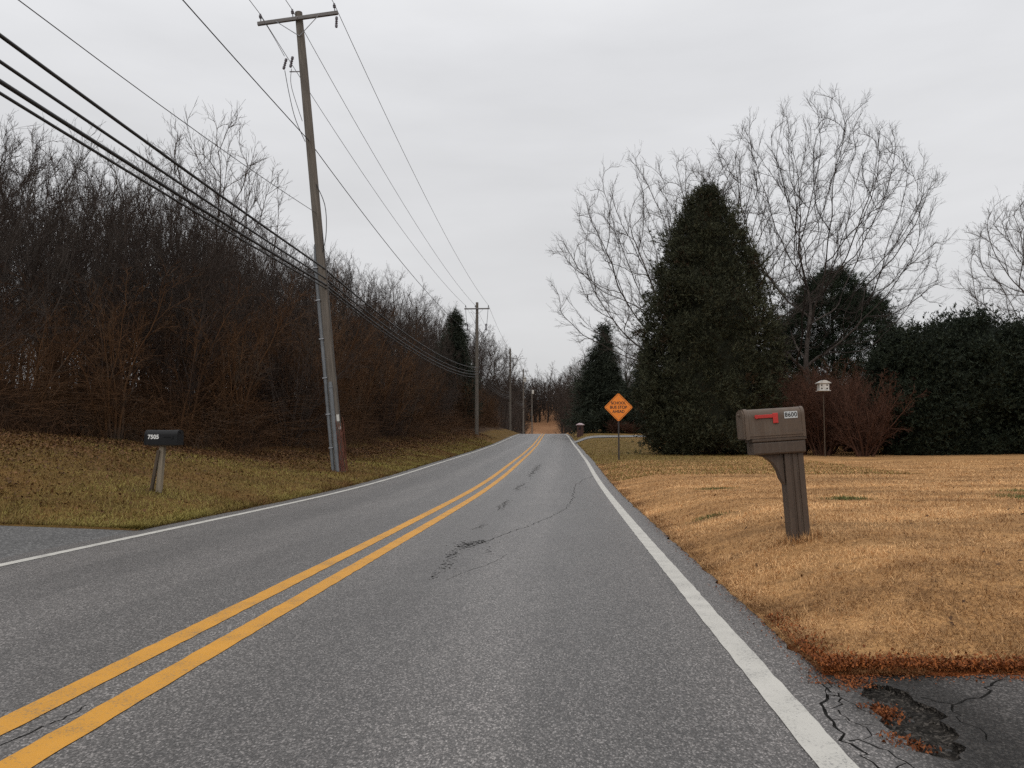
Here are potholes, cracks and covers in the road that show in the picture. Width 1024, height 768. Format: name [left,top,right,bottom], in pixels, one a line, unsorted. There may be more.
crack [819,682,914,768]
crack [447,464,587,580]
pothole [861,683,966,761]
crack [920,679,1008,743]
crack [0,704,88,746]
